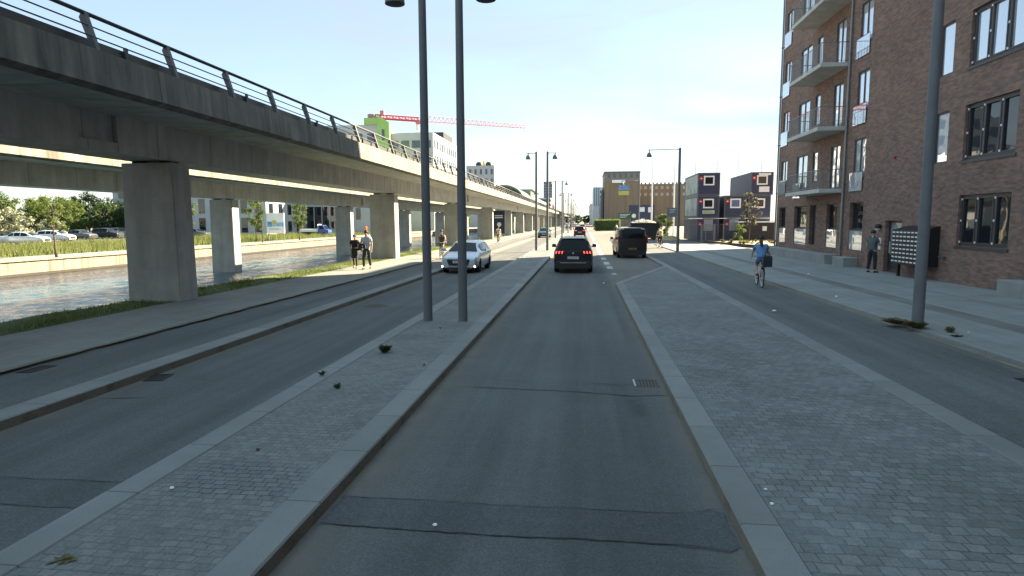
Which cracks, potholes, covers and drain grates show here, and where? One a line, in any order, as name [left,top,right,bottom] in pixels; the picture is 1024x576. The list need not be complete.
drain grate [633,379,660,387]
drain grate [142,374,174,382]
drain grate [16,365,57,373]
